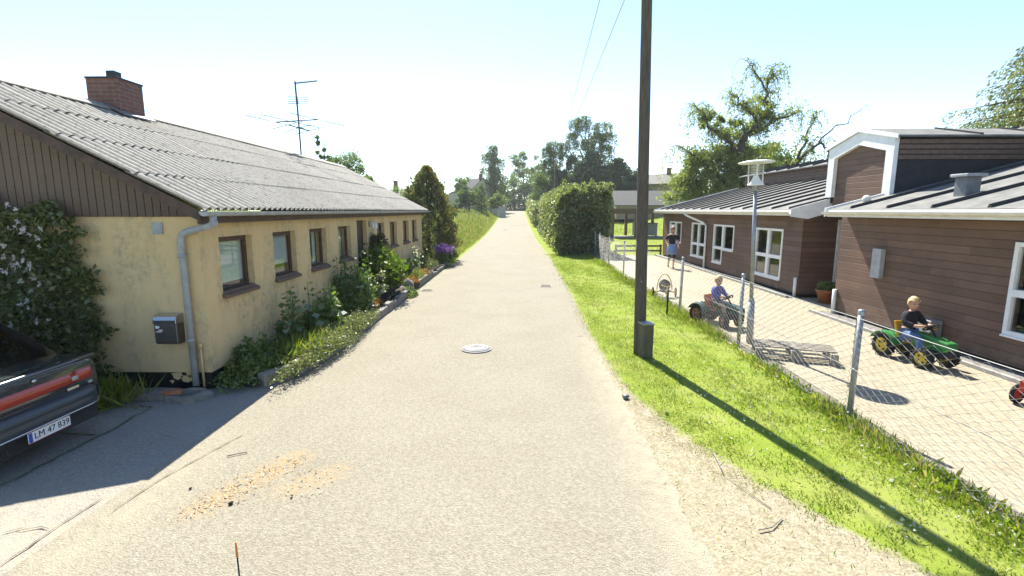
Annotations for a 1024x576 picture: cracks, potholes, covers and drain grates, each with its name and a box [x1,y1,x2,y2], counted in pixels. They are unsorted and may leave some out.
manhole cover [461,344,492,353]
